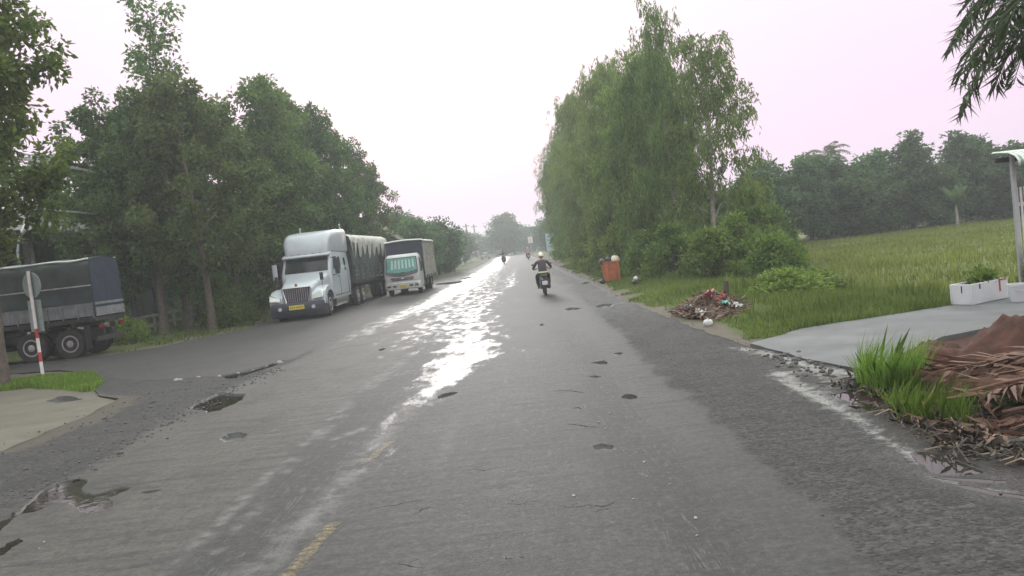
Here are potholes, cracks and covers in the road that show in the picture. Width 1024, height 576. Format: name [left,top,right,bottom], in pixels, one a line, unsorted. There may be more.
pothole [220,432,248,442]
pothole [15,478,132,519]
pothole [0,538,23,556]
pothole [190,392,246,413]
